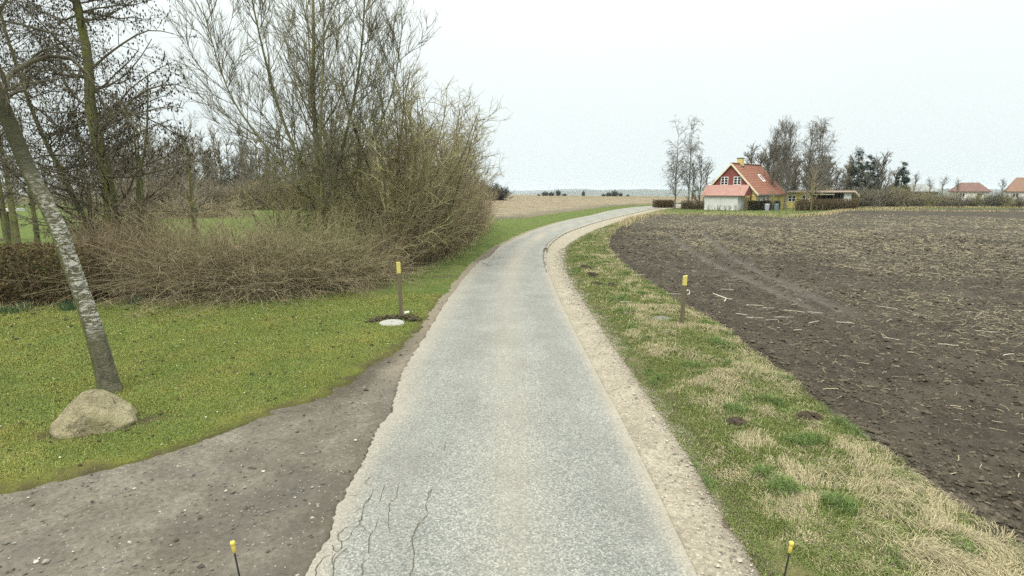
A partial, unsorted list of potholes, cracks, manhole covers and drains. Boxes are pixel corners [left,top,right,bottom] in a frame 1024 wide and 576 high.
crack [315,477,432,576]
